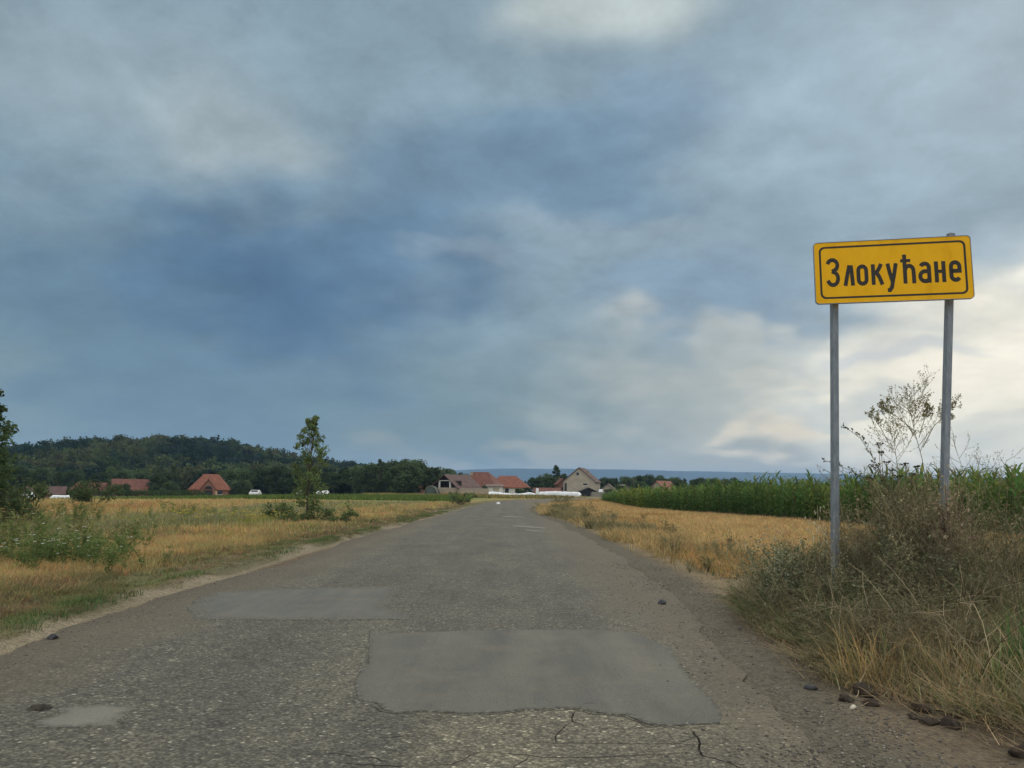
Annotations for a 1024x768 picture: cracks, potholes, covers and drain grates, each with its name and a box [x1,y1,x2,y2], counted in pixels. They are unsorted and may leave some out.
crack [342,703,740,768]
pothole [26,703,53,712]
